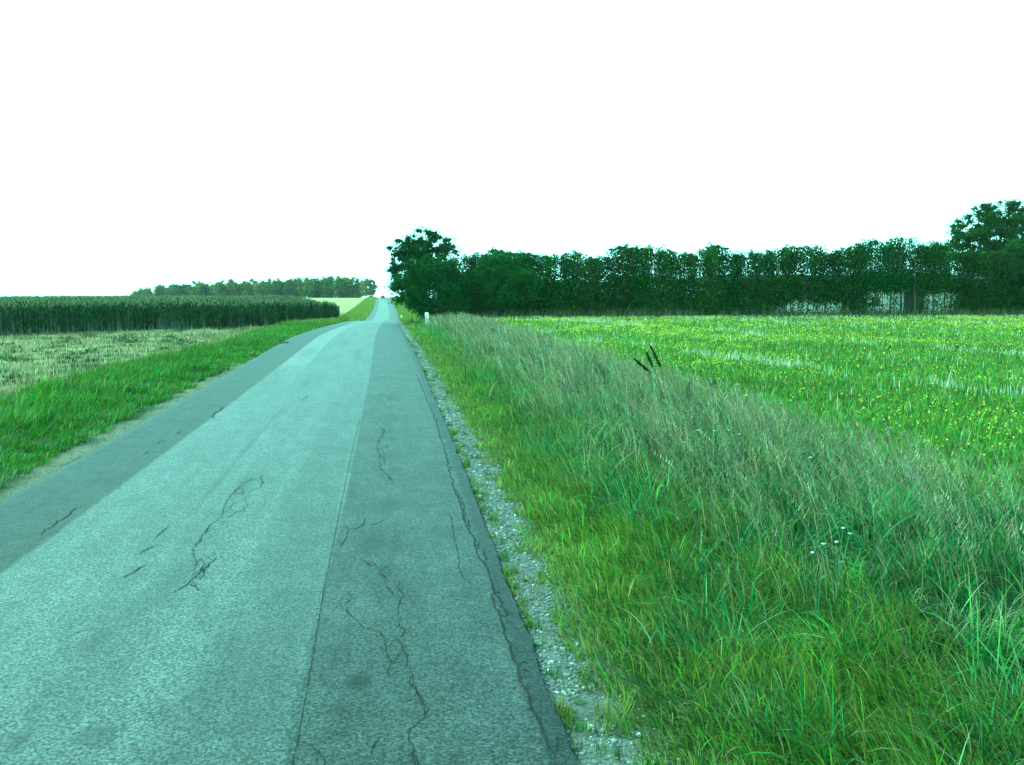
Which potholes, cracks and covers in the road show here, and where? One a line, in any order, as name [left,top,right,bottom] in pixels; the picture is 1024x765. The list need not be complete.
crack [174,474,264,593]
crack [416,374,559,764]
crack [339,518,429,765]
crack [375,422,391,478]
